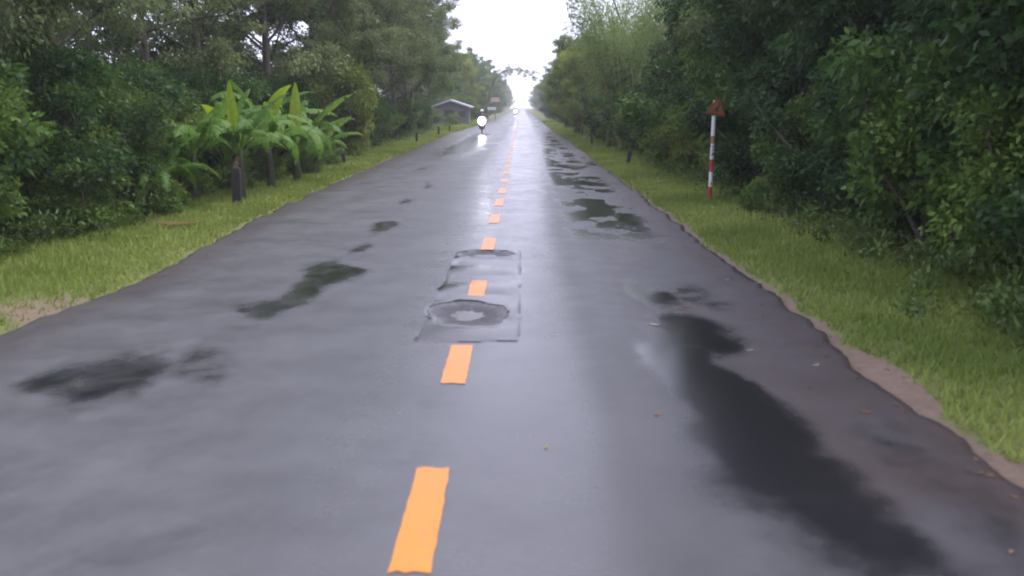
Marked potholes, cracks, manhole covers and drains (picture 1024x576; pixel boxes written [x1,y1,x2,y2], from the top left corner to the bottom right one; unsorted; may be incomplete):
pothole [451,249,519,259]
pothole [422,299,513,328]
